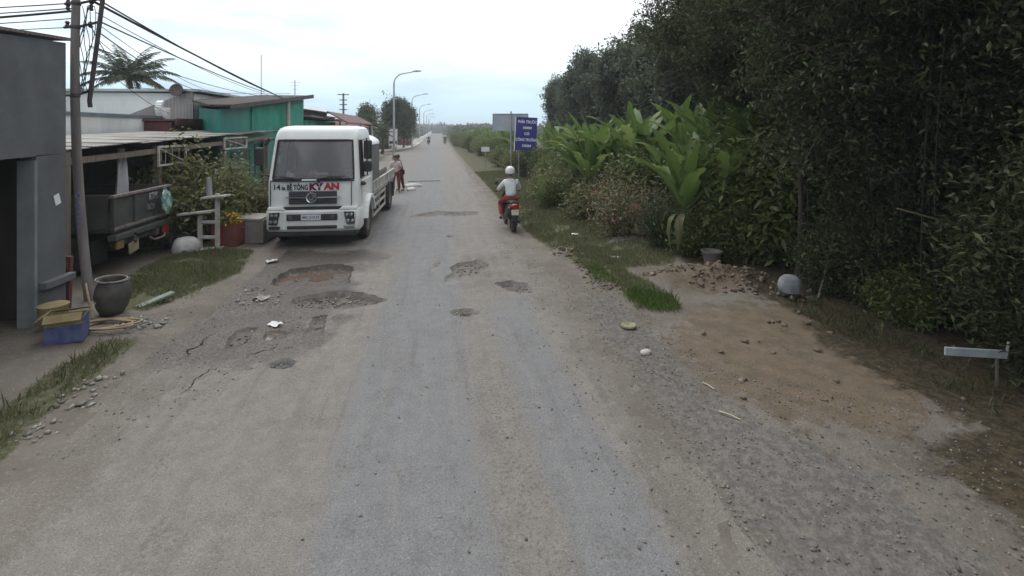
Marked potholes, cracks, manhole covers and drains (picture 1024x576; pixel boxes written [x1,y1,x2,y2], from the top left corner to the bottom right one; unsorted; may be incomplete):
crack [177,334,214,395]
pothole [270,264,354,290]
pothole [290,290,387,311]
pothole [266,359,298,369]
pothole [212,327,258,363]
pothole [300,314,328,342]
pothole [450,308,481,318]
pothole [443,259,489,285]
pothole [495,280,540,295]
